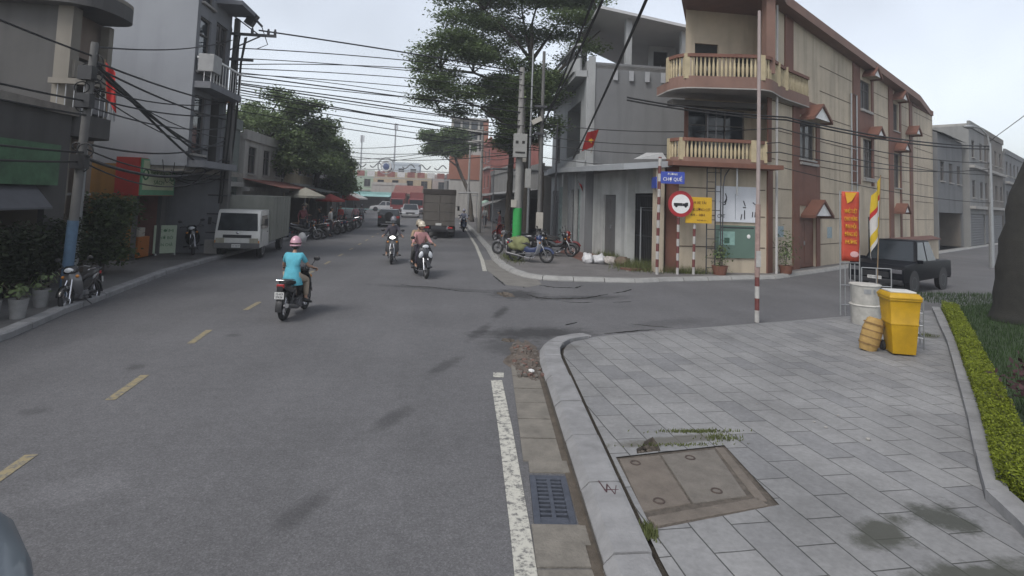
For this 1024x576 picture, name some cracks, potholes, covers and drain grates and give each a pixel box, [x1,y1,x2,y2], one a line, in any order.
manhole cover [614,447,768,526]
drain grate [529,475,577,525]
crack [523,285,632,303]
